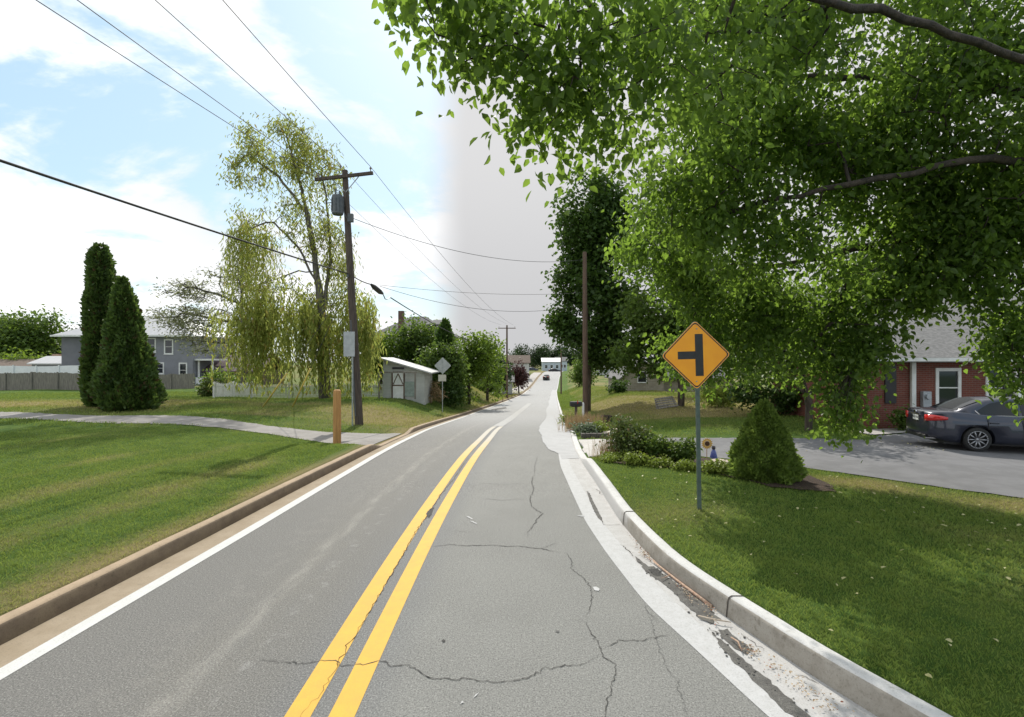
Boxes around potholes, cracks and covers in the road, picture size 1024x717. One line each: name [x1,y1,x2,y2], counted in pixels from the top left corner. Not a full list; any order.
pothole [632,555,726,626]
crack [252,456,687,716]
pothole [707,628,811,717]
